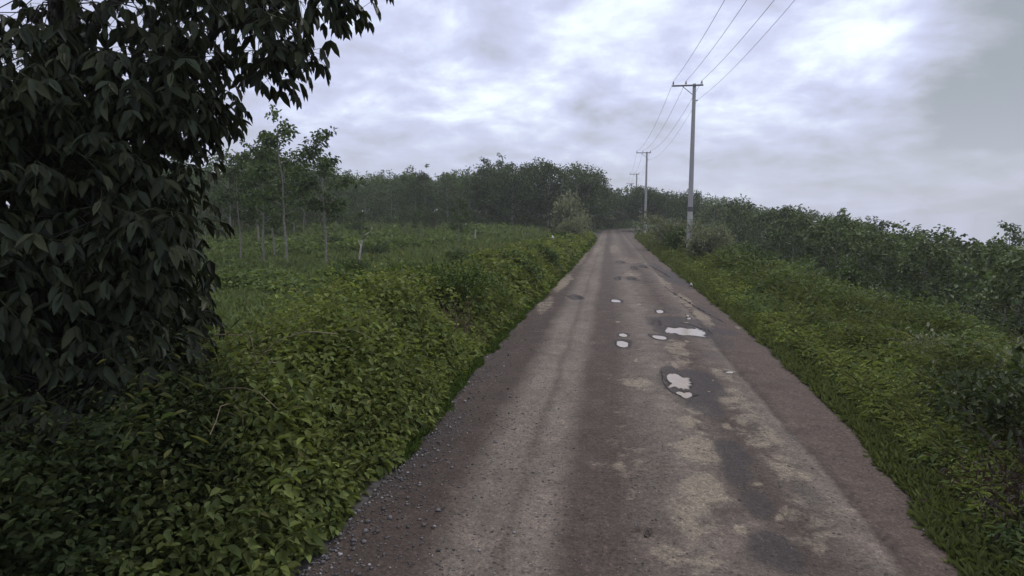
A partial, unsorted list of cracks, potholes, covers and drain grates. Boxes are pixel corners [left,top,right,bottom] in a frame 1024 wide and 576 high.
pothole [661,369,694,391]
pothole [673,390,694,399]
pothole [616,340,631,348]
pothole [656,325,712,337]
